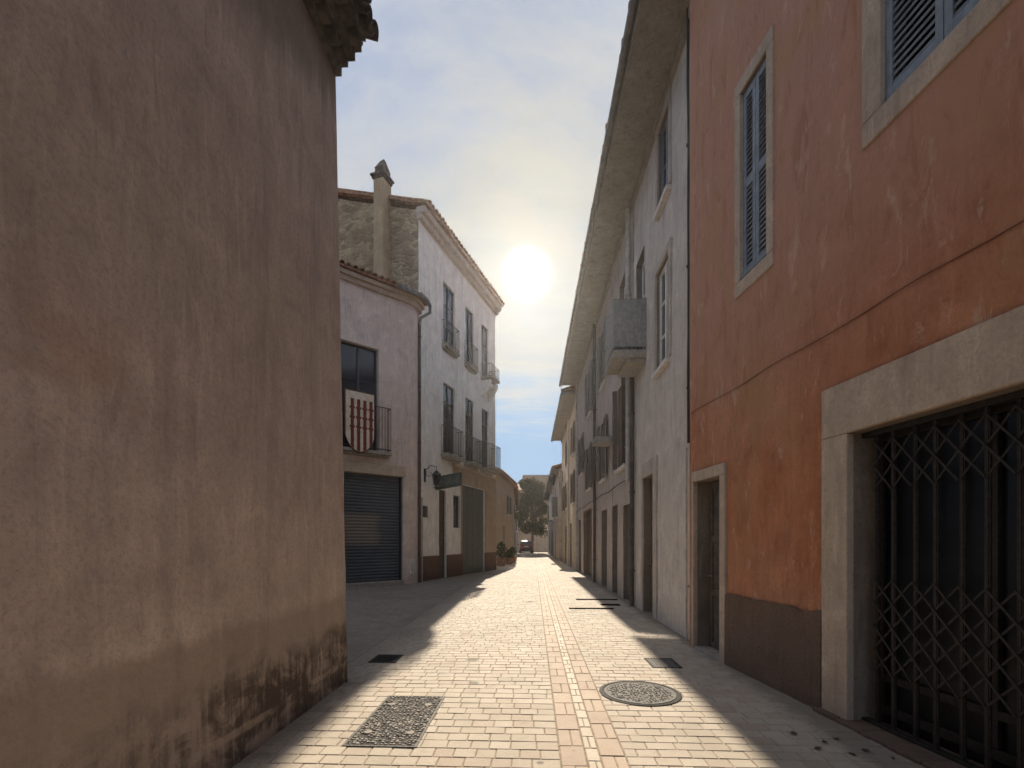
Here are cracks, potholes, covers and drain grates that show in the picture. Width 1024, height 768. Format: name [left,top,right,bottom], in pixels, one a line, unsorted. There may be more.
manhole cover [341,695,445,749]
drain grate [368,654,403,663]
manhole cover [599,680,682,707]
